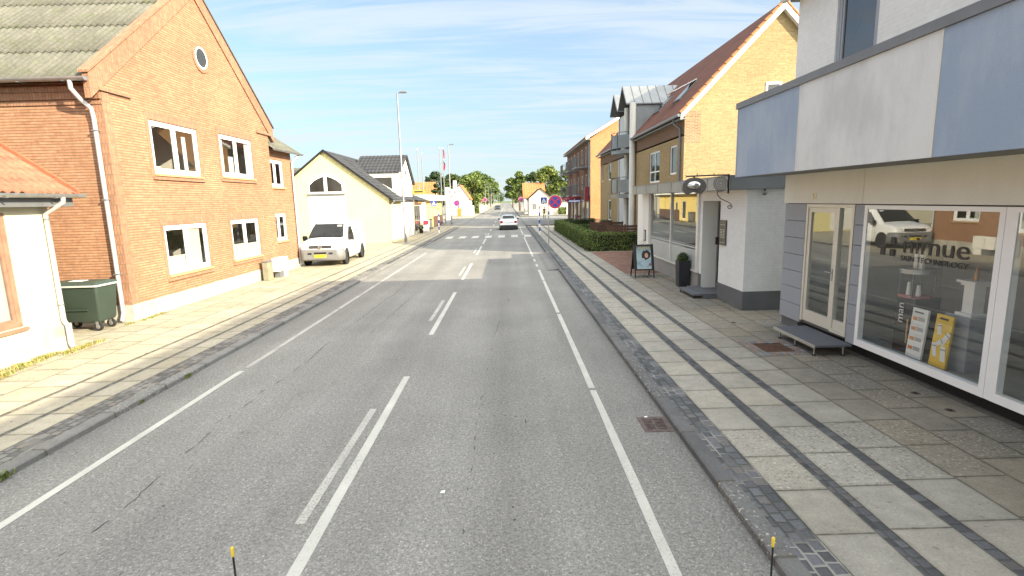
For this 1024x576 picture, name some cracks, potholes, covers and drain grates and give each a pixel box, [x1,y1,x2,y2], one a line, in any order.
manhole cover [738,340,812,356]
drain grate [636,416,674,432]
